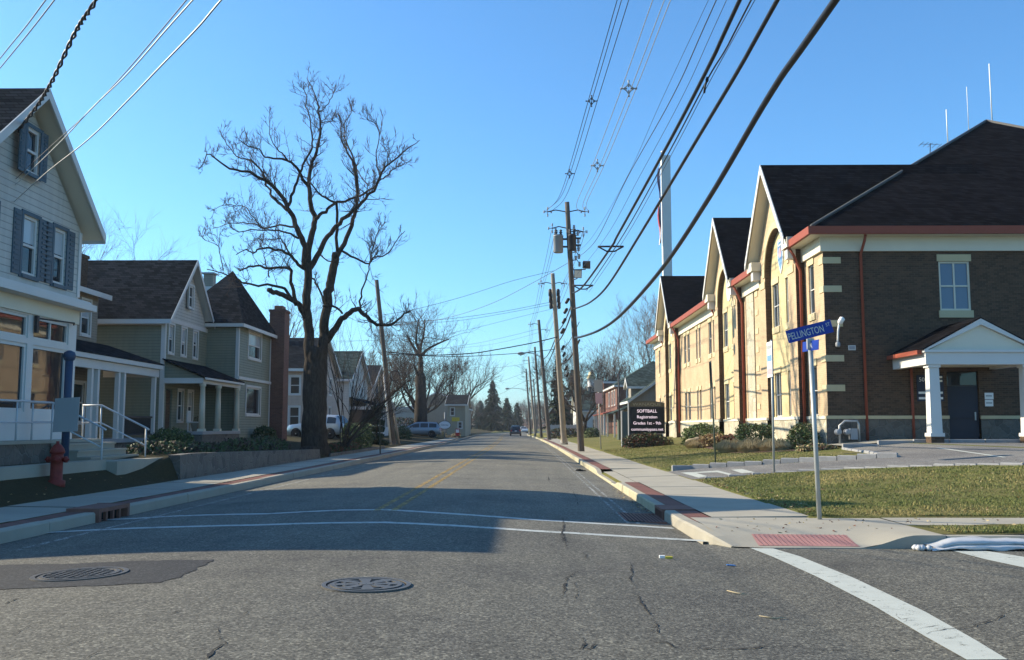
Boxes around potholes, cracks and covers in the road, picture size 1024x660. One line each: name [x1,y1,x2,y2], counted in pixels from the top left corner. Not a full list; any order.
drain grate [617,505,696,524]
drain grate [66,503,130,523]
crack [629,561,766,649]
manhole cover [29,567,129,582]
crack [207,628,226,657]
crack [560,491,587,597]
manhole cover [321,577,411,593]
